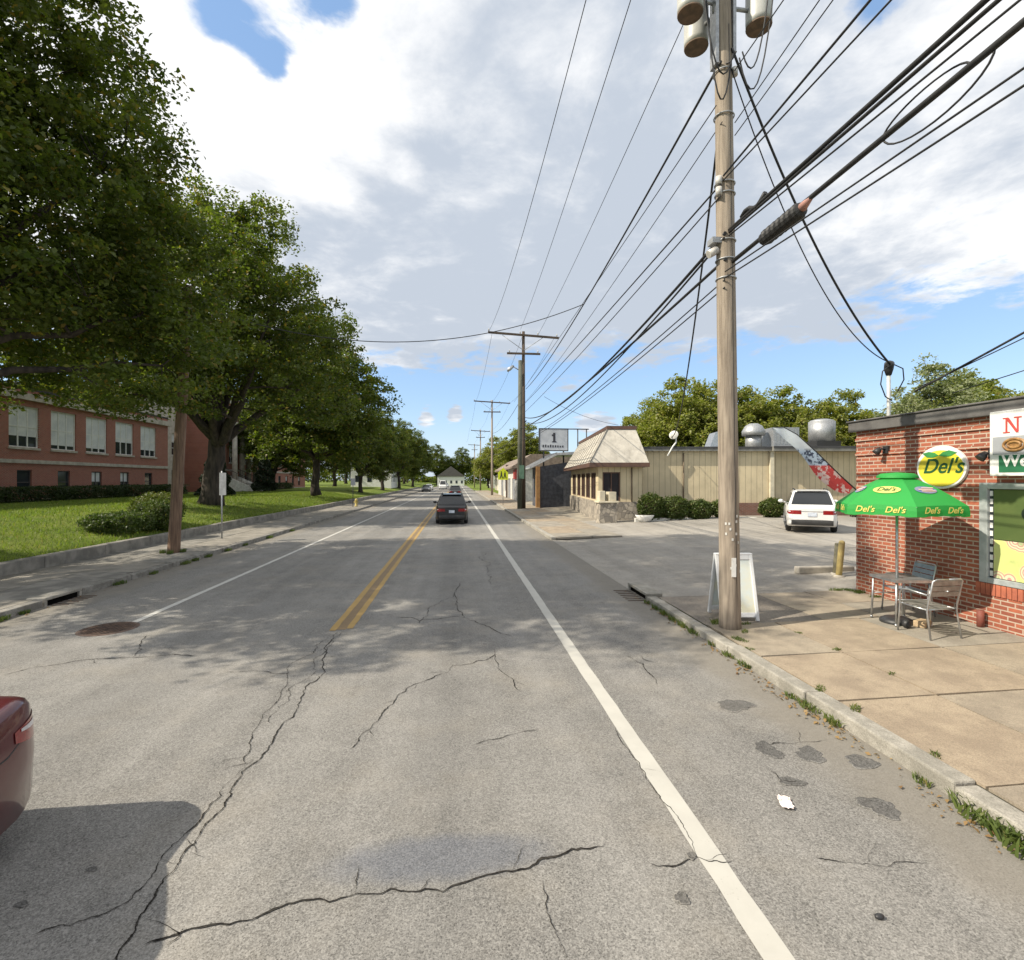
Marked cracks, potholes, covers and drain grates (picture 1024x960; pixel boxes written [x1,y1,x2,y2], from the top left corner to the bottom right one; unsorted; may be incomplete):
crack [401,583,502,634]
crack [821,849,919,867]
crack [615,729,696,853]
manhole cover [75,622,140,636]
crack [36,630,598,960]
drain grate [613,582,662,602]
drain grate [26,588,97,607]
